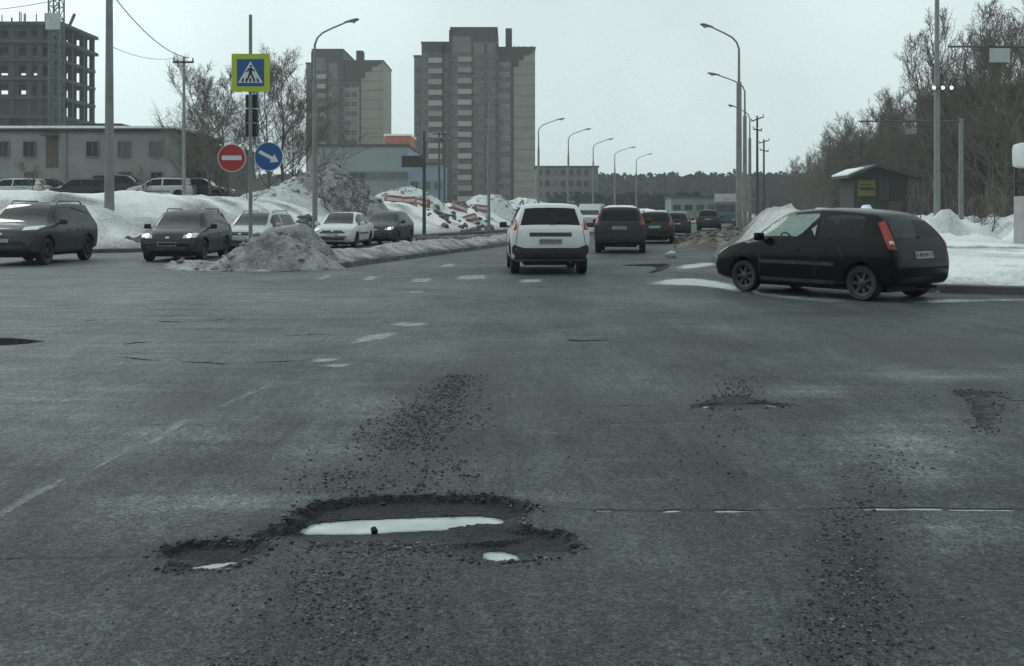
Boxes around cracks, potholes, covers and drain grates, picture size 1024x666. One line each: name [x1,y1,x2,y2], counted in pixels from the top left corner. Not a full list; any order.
pothole [952,390,1004,428]
pothole [247,493,586,565]
pothole [625,264,671,273]
pothole [689,395,796,410]
pothole [155,538,269,572]
